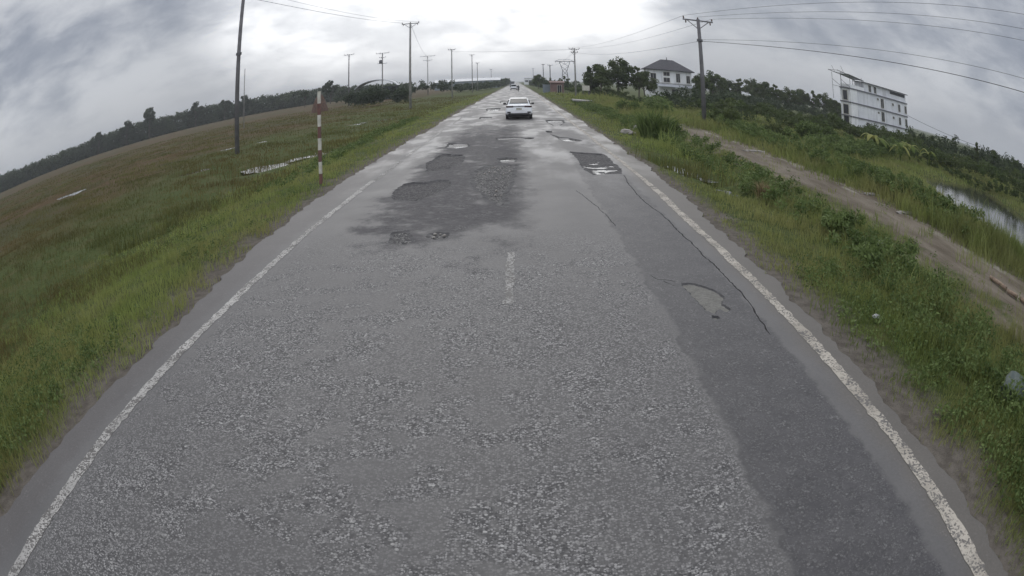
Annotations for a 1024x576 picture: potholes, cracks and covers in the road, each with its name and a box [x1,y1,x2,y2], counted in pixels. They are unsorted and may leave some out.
pothole [426,232,450,240]
crack [624,176,771,335]
pothole [391,180,452,201]
pothole [425,154,465,172]
pothole [681,283,731,314]
pothole [570,151,622,175]
pothole [388,230,415,245]
pothole [468,164,519,208]
